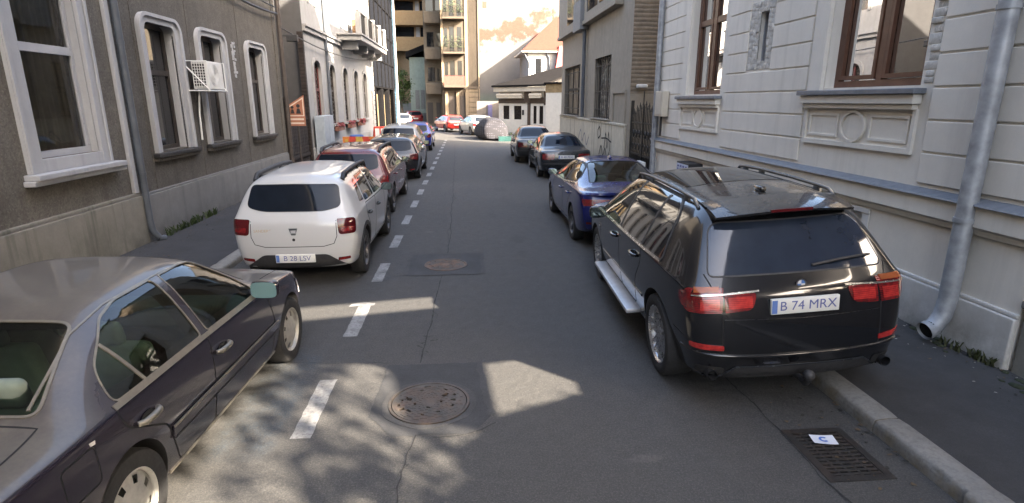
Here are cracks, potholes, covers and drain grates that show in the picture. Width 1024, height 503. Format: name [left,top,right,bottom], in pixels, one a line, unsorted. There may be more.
crack [417,276,442,363]
manhole cover [382,380,476,429]
manhole cover [424,258,467,271]
crack [385,435,416,503]
drain grate [781,427,898,483]
